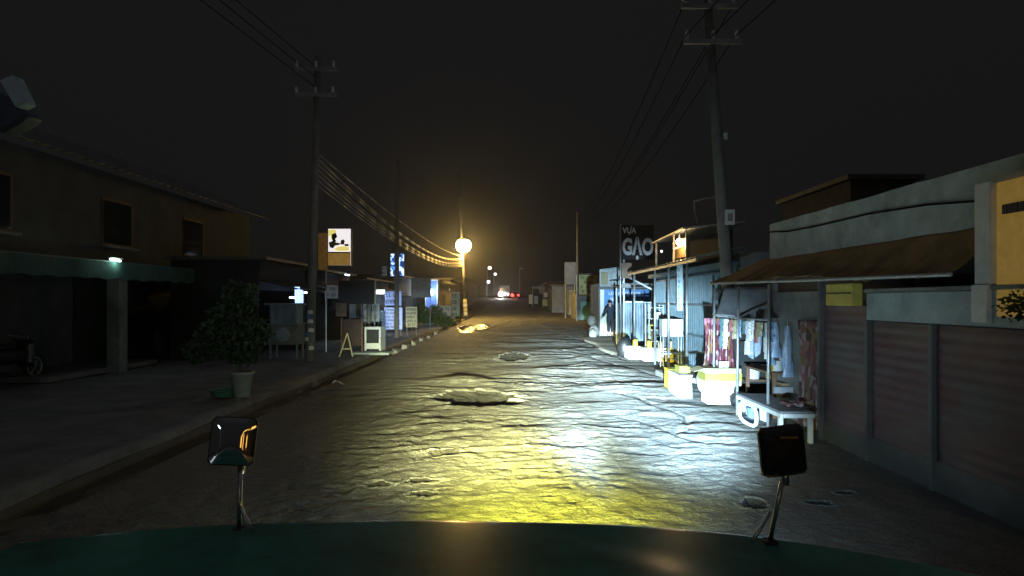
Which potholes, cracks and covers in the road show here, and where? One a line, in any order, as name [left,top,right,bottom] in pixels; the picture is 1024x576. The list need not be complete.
pothole [799,499,838,507]
pothole [454,324,493,333]
pothole [355,478,399,489]
pothole [406,387,541,410]
pothole [732,495,774,512]
pothole [403,490,445,500]
pothole [493,351,535,363]
